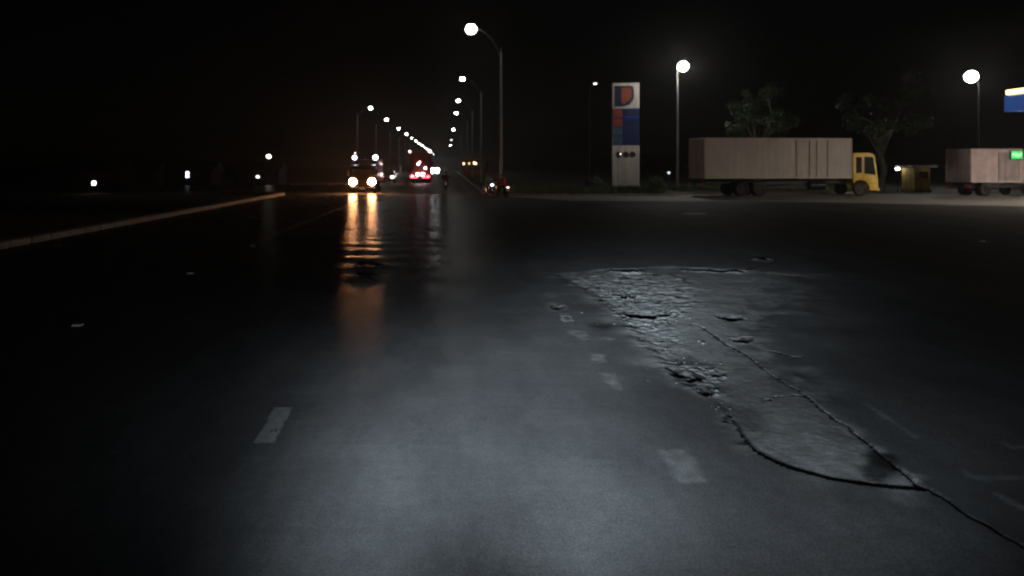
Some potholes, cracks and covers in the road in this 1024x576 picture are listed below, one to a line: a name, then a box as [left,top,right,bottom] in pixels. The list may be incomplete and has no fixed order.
pothole [684,372,706,383]
pothole [714,314,746,322]
pothole [664,365,693,379]
pothole [619,310,672,320]
pothole [697,386,715,397]
crack [625,313,1024,549]
